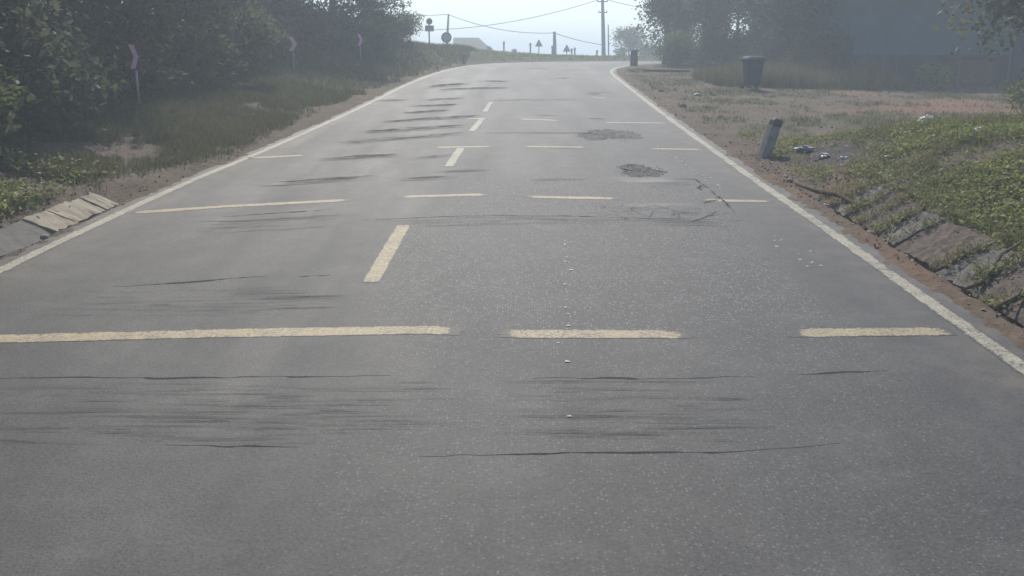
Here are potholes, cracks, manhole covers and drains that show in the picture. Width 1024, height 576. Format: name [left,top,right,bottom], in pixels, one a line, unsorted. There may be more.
pothole [576,129,644,142]
crack [432,370,887,457]
crack [0,375,423,447]
crack [375,179,743,226]
pothole [619,164,667,178]
